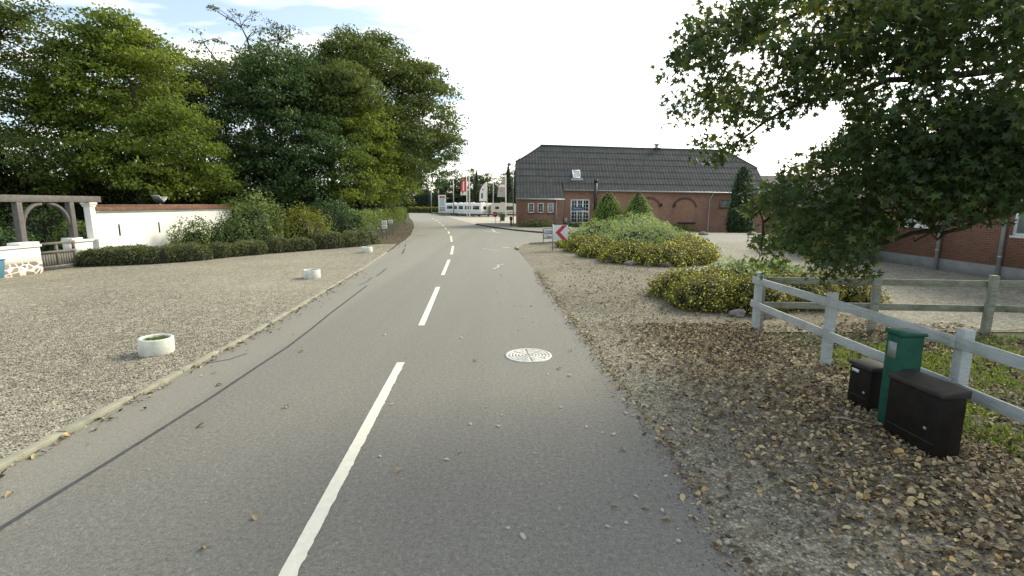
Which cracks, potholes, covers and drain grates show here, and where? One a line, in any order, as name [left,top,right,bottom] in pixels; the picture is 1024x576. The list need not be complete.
manhole cover [505,348,552,363]
